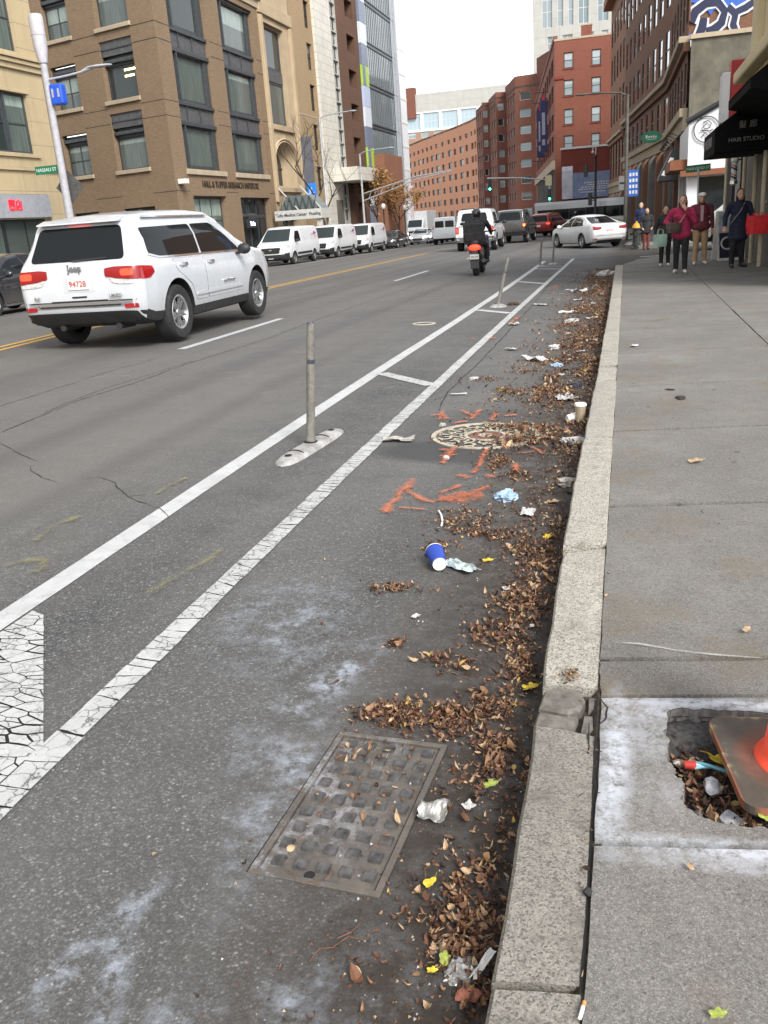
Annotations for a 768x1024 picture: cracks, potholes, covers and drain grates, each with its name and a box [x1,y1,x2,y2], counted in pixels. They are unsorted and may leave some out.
pothole [663,708,768,828]
manhole cover [431,423,539,449]
